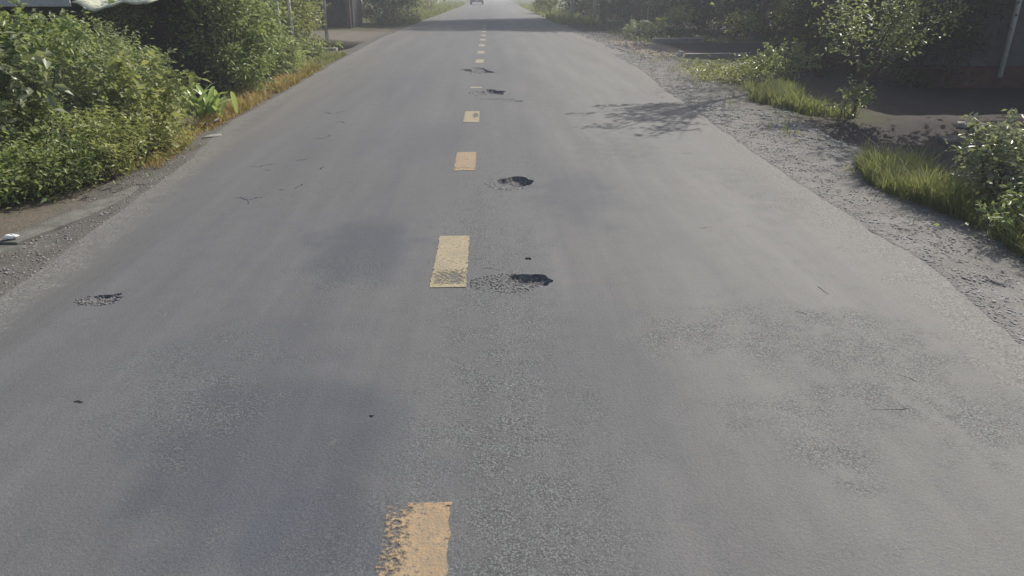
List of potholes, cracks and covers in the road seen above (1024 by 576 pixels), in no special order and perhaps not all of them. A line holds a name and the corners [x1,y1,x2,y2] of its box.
pothole [488,176,534,191]
pothole [74,293,123,306]
pothole [470,273,553,293]
